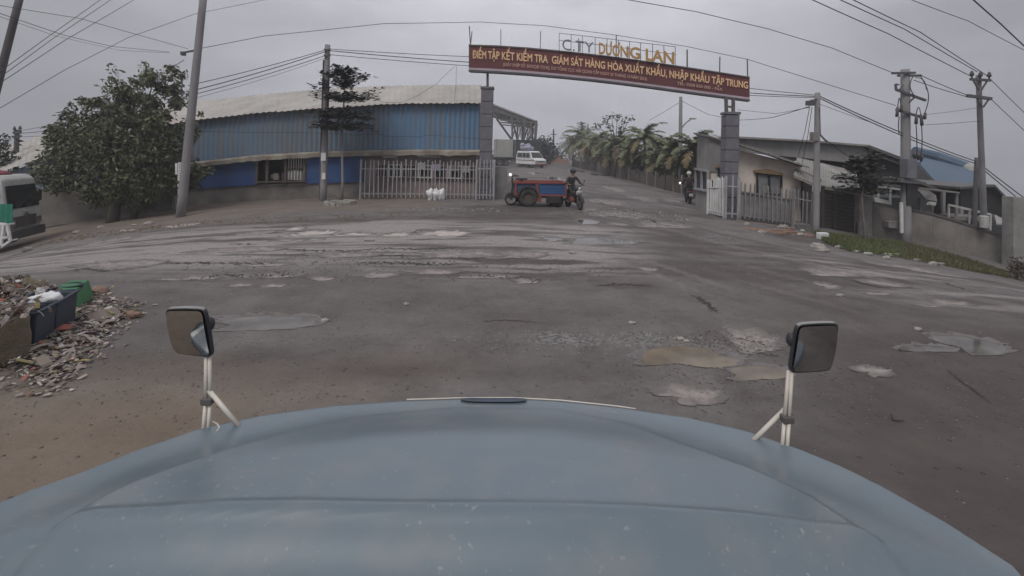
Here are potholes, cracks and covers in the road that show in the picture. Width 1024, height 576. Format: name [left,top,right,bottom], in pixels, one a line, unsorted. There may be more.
pothole [725,362,797,381]
crack [947,369,989,402]
crack [693,295,717,312]
pothole [644,382,730,406]
pothole [719,325,788,354]
pothole [627,341,757,369]
pothole [562,236,643,245]
